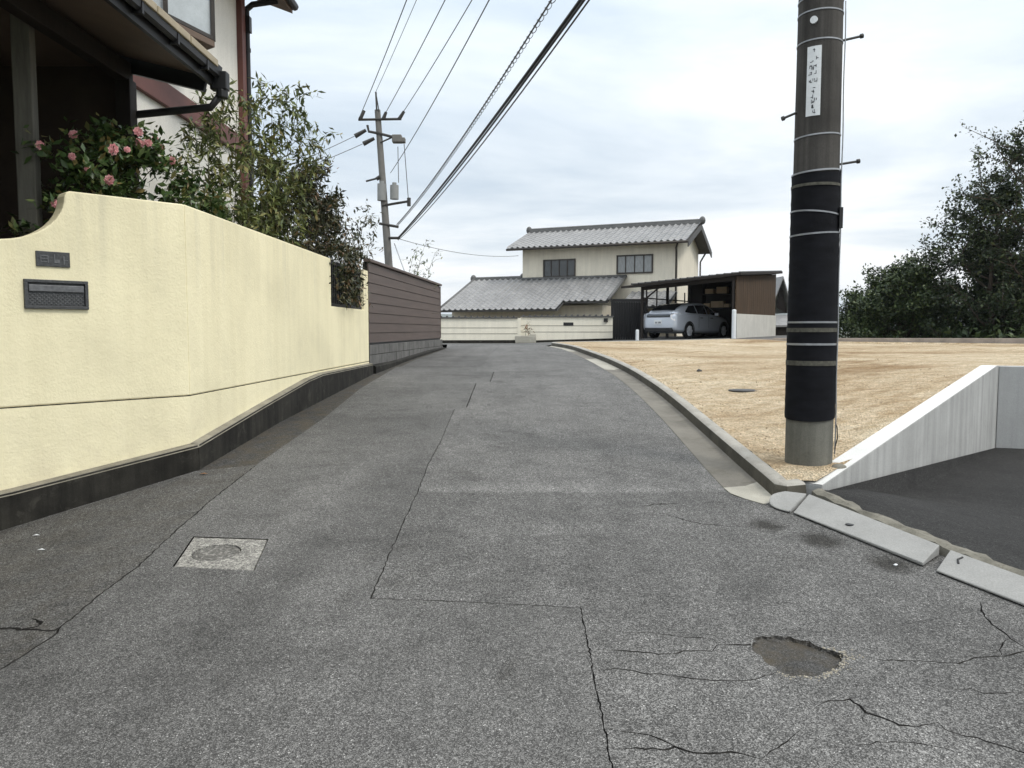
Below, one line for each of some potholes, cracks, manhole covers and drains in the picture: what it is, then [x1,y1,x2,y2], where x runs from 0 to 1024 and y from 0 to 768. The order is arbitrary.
manhole cover [174,537,267,571]
crack [597,632,774,681]
crack [0,619,61,632]
crack [818,688,1024,753]
pothole [752,636,864,681]
crack [868,602,1024,664]
crack [610,729,799,765]
